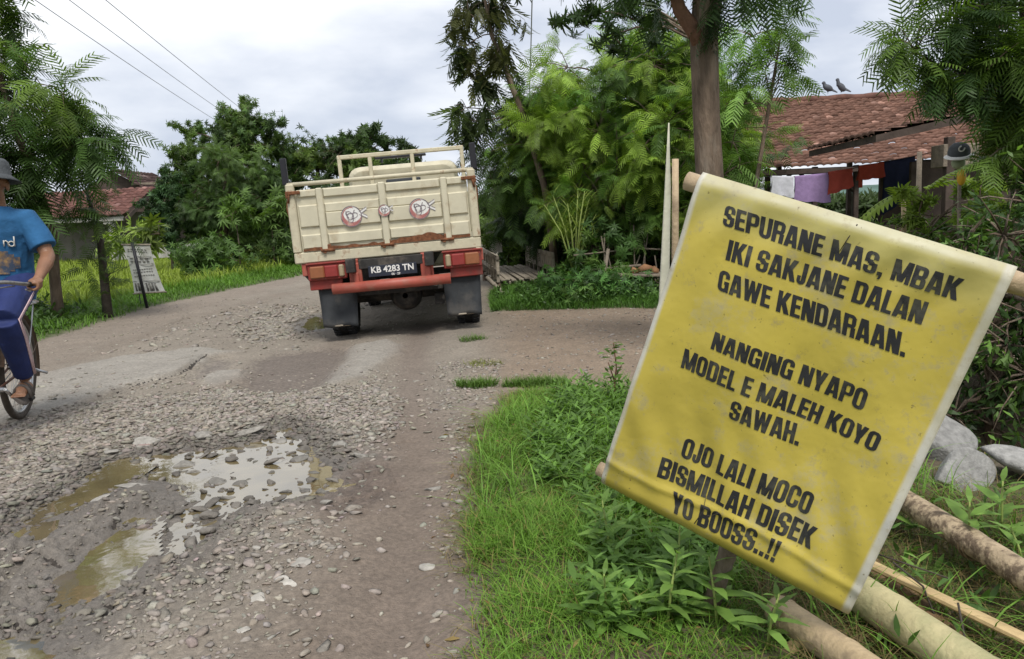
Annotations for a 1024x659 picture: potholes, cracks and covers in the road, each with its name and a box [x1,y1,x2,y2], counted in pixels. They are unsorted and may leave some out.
pothole [11,457,156,541]
crack [116,354,207,394]
pothole [44,515,167,628]
pothole [301,316,325,331]
pothole [238,348,349,394]
pothole [145,426,356,556]
